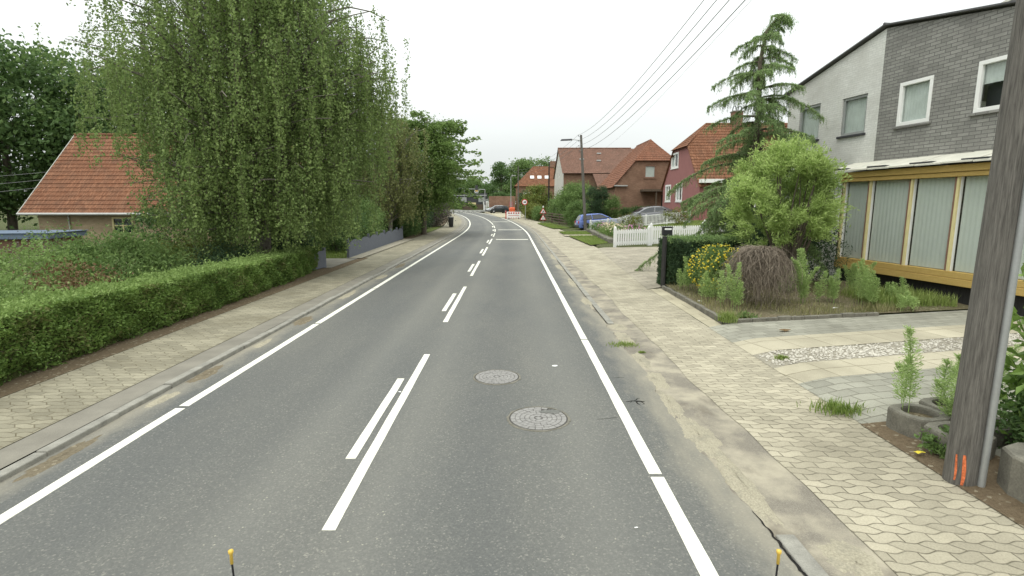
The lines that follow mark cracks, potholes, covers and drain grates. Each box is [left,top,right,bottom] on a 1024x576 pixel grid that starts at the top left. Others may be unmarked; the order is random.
manhole cover [473,369,521,385]
manhole cover [506,406,571,432]
